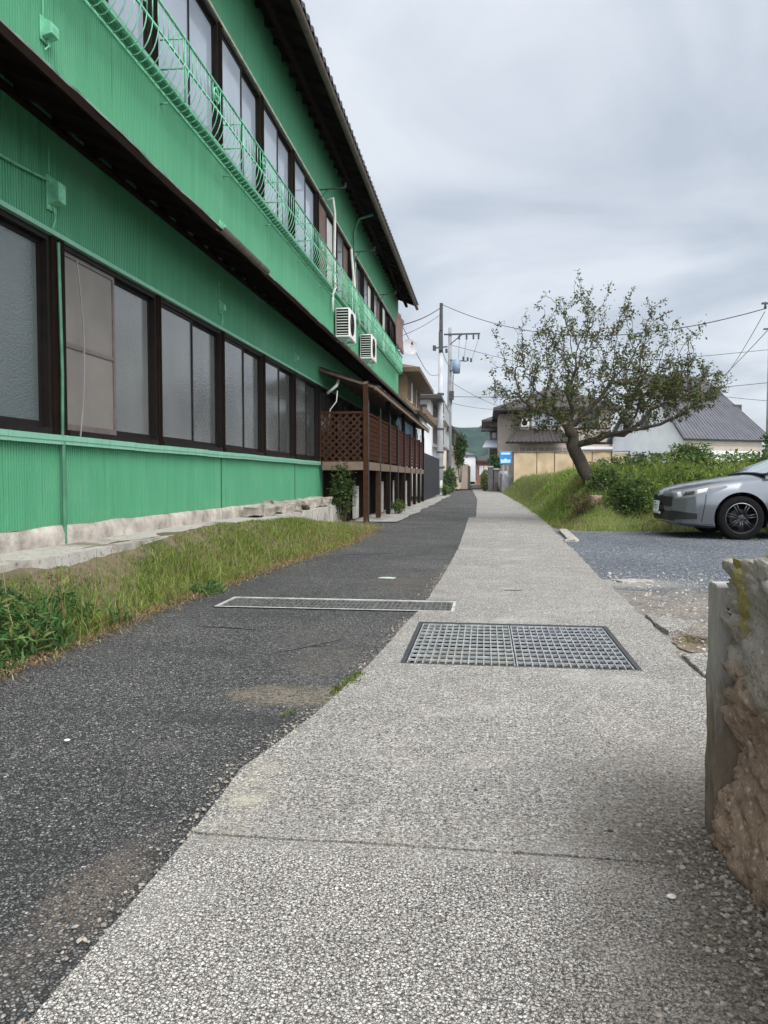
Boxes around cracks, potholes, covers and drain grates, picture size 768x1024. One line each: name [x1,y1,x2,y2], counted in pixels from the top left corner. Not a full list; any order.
drain grate [400,622,643,671]
drain grate [213,596,456,623]
